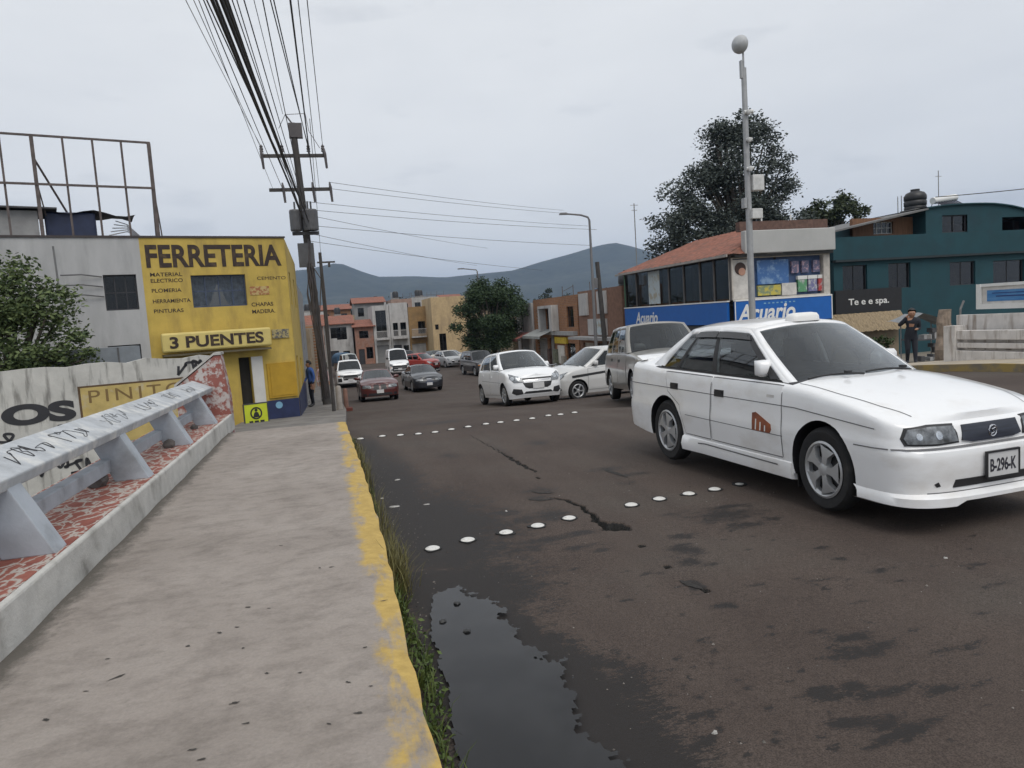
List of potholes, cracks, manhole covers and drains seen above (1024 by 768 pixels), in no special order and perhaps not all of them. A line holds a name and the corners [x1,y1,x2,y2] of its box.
crack [529,491,607,530]
crack [476,438,537,473]
